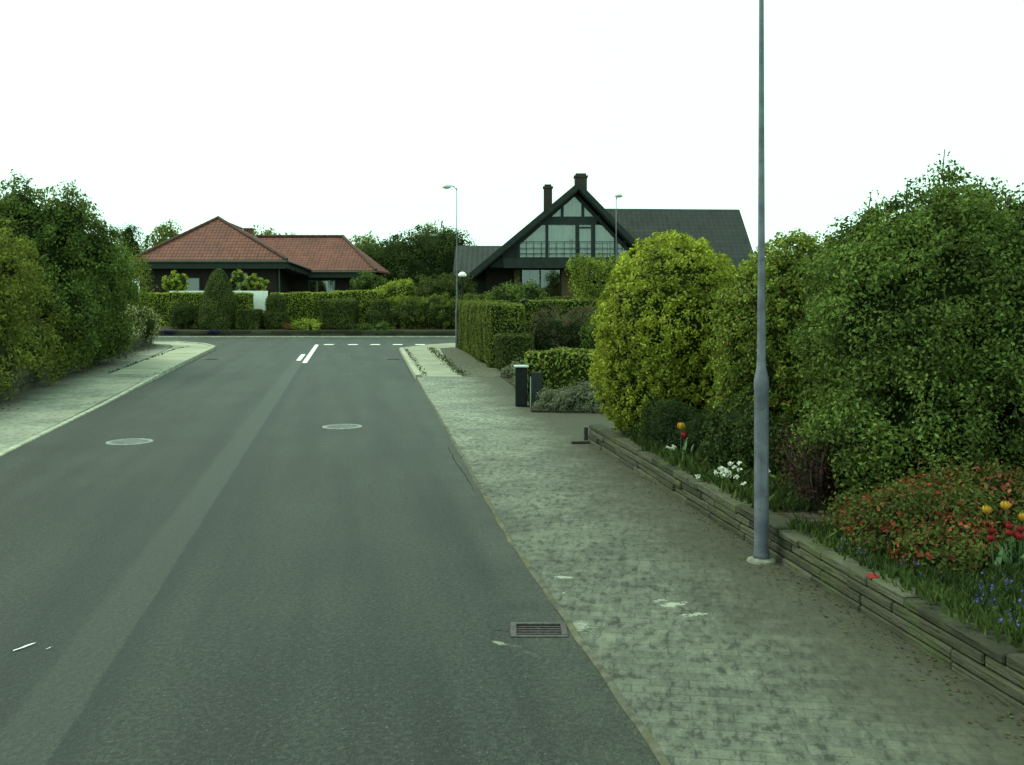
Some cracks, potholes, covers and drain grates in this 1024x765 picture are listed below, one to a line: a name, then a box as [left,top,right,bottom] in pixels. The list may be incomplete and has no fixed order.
drain grate [510,622,568,637]
